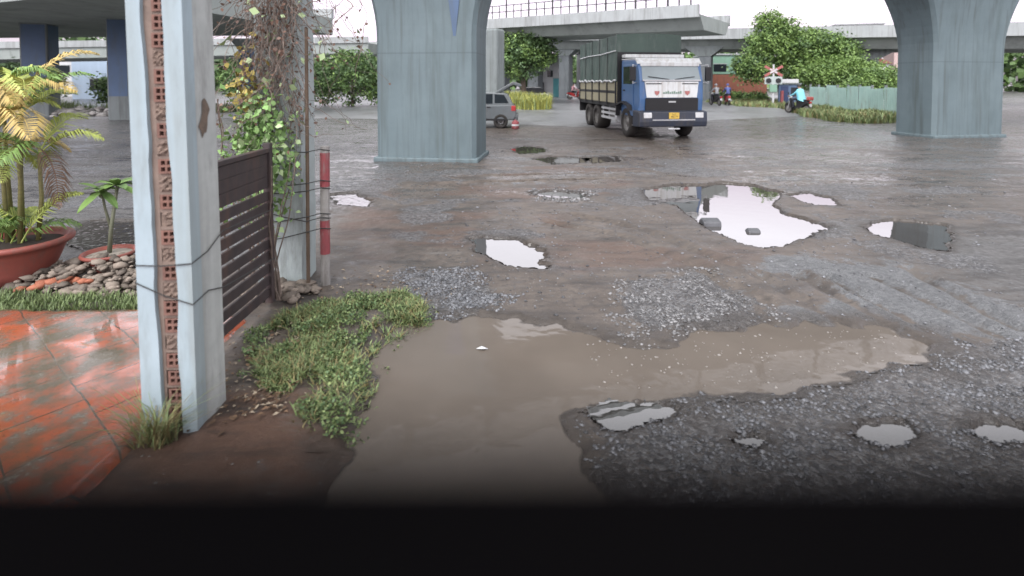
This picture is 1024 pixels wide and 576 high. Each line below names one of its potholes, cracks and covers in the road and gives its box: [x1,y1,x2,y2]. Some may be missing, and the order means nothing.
pothole [469,235,551,269]
pothole [862,219,955,251]
pothole [531,190,585,198]
pothole [510,145,546,154]
pothole [531,155,590,165]
pothole [583,155,623,163]
pothole [337,308,970,433]
pothole [643,182,836,248]
pothole [970,417,1024,433]
pothole [330,191,373,207]
